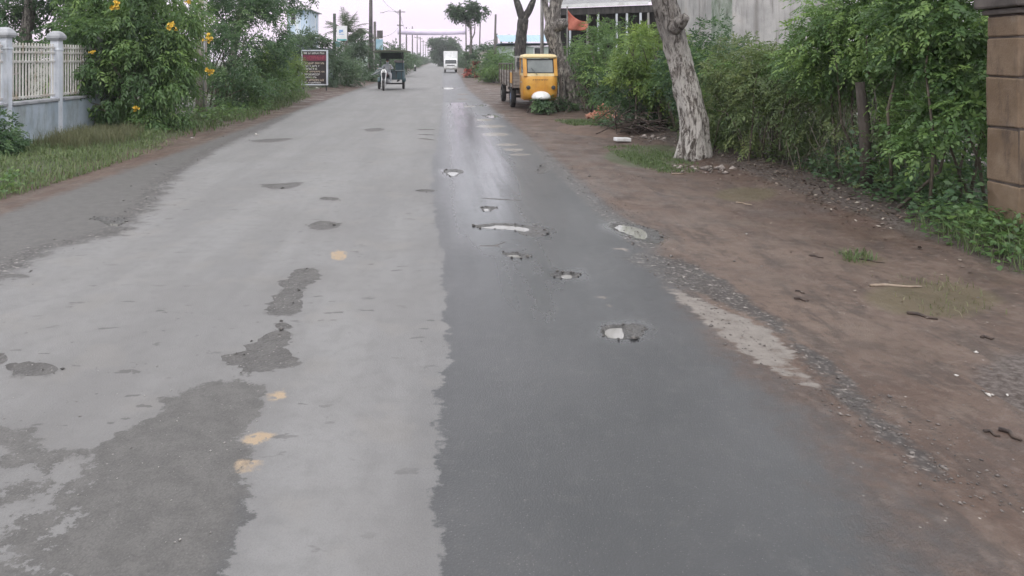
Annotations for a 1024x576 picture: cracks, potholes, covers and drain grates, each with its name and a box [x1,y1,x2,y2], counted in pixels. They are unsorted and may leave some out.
pothole [501,251,532,259]
pothole [442,168,464,177]
pothole [472,223,549,237]
pothole [550,270,581,279]
pothole [600,323,648,341]
pothole [608,222,665,243]
